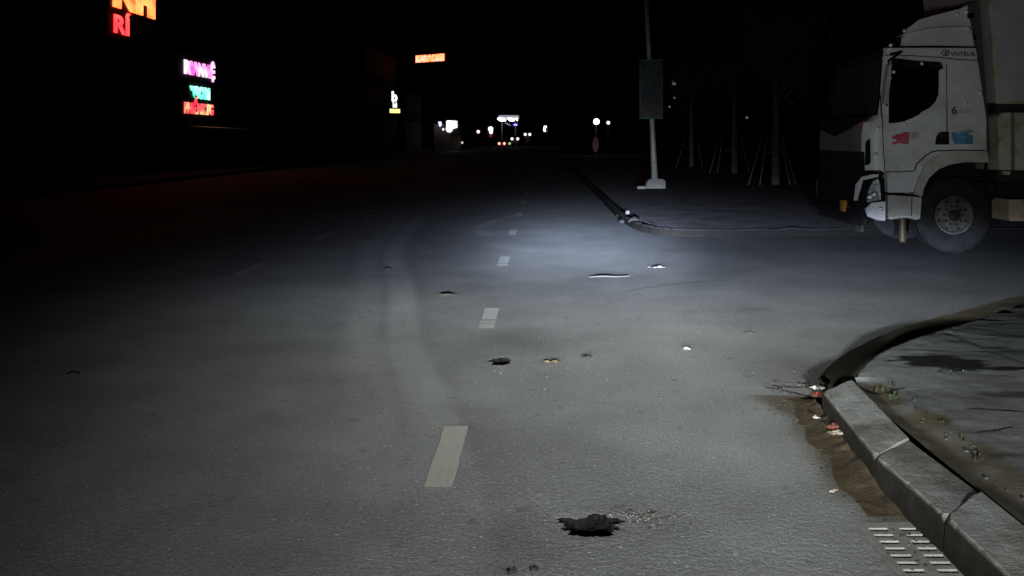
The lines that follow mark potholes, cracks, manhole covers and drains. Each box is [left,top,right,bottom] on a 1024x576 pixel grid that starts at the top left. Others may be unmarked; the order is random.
crack [968,408,1024,433]
pothole [526,505,656,546]
drain grate [854,522,964,576]
pothole [477,354,524,368]
